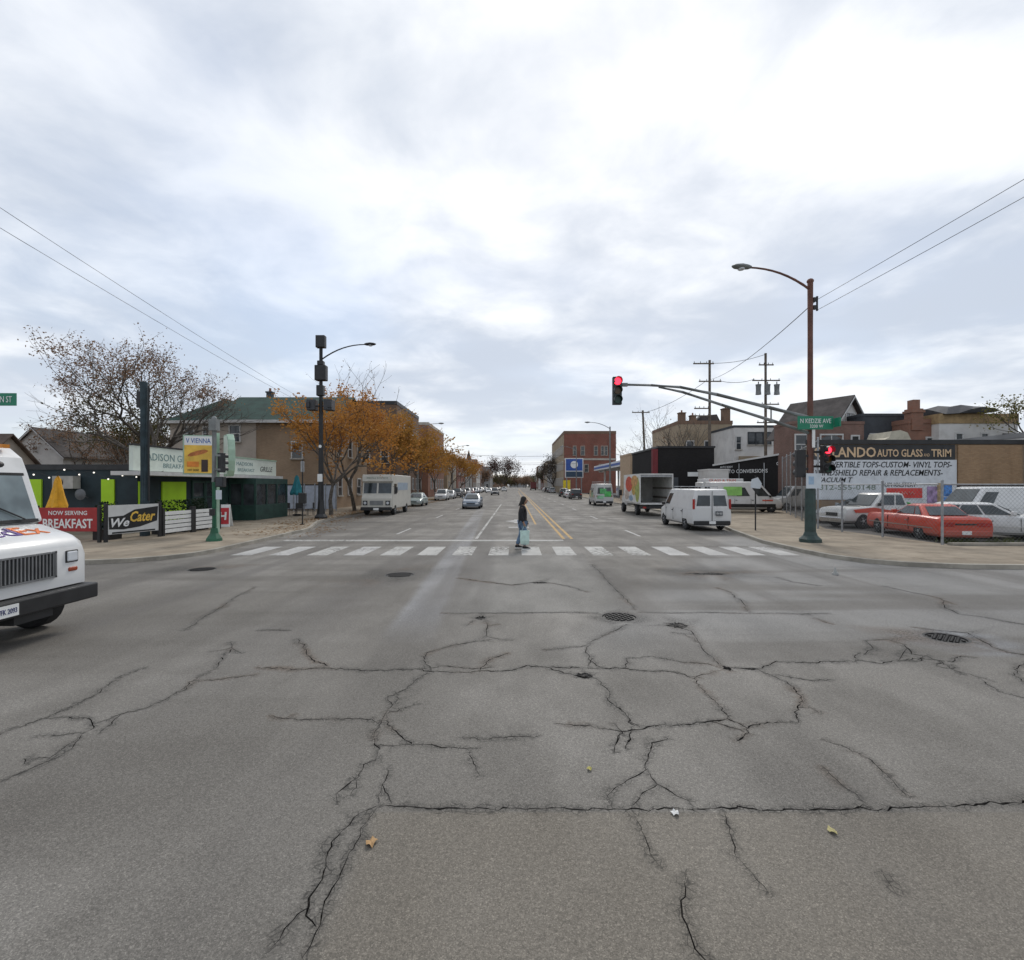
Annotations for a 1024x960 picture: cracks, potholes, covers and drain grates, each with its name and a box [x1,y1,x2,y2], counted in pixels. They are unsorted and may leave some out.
crack [0,642,252,781]
manhole cover [600,612,639,622]
crack [666,586,1024,724]
crack [266,622,796,958]
